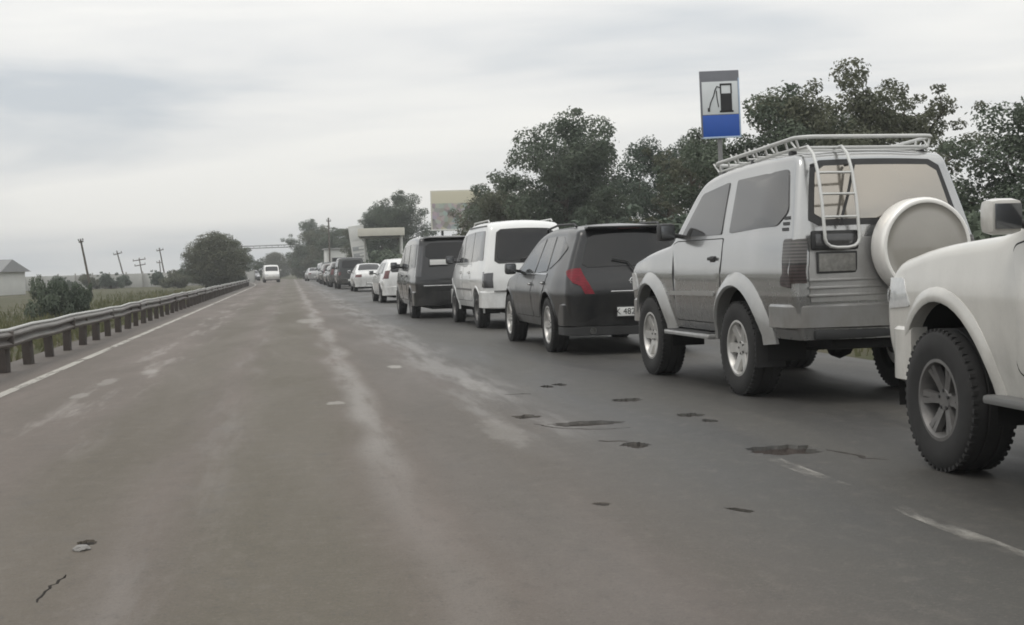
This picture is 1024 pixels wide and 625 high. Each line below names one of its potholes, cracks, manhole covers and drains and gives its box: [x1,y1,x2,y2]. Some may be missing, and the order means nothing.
pothole [745,444,822,455]
crack [36,575,66,603]
